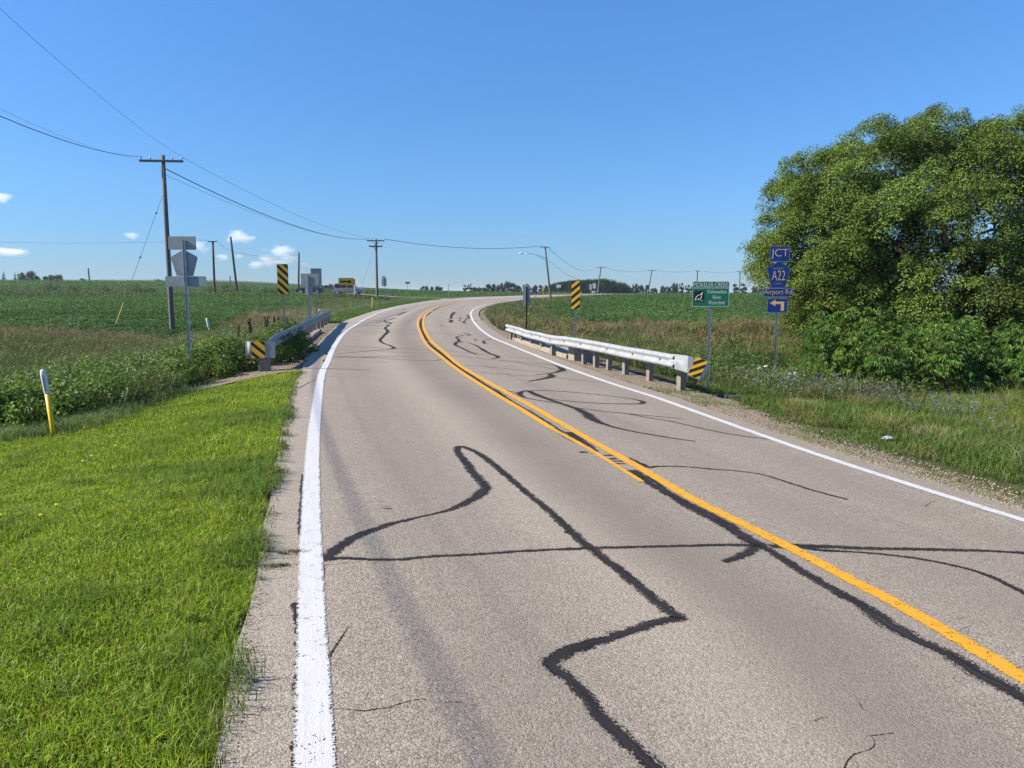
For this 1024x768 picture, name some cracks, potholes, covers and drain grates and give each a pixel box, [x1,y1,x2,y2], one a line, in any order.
crack [814,702,893,768]
crack [330,699,478,711]
